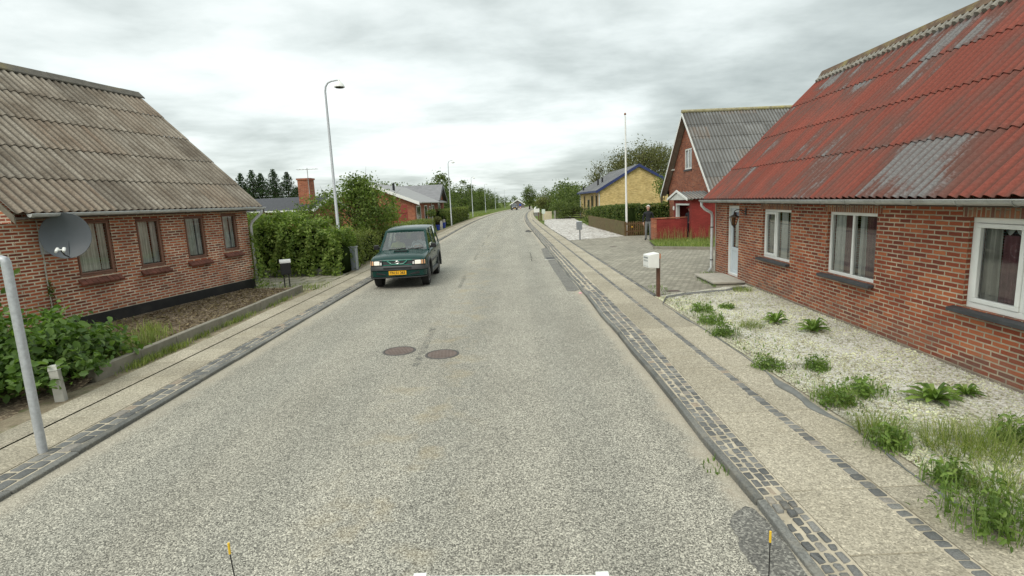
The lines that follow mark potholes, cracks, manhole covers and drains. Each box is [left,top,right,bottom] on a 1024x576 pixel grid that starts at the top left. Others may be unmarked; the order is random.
manhole cover [425,349,459,359]
manhole cover [382,346,416,356]
